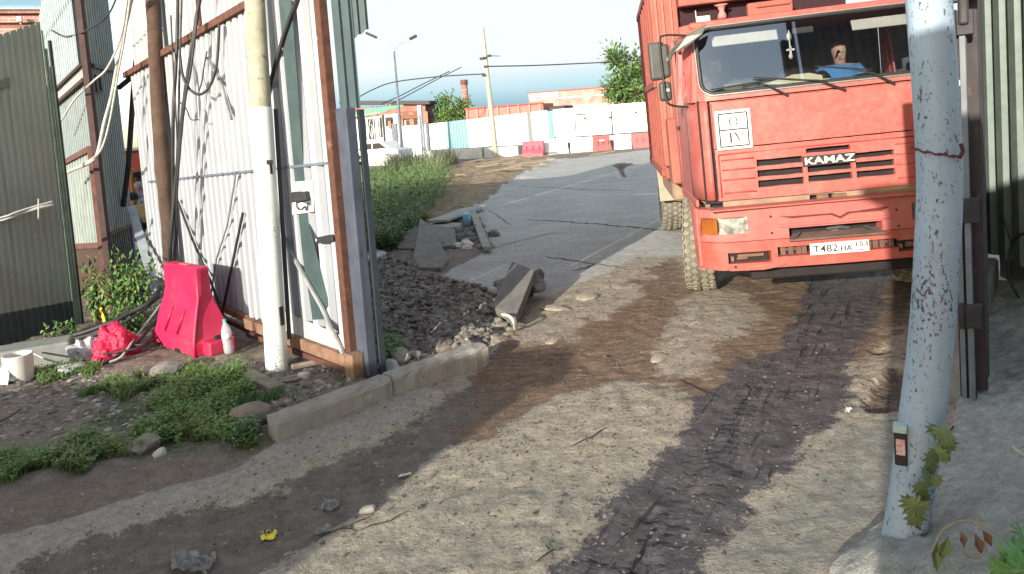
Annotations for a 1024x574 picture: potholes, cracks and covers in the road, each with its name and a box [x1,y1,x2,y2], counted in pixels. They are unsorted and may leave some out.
crack [489,209,675,246]
